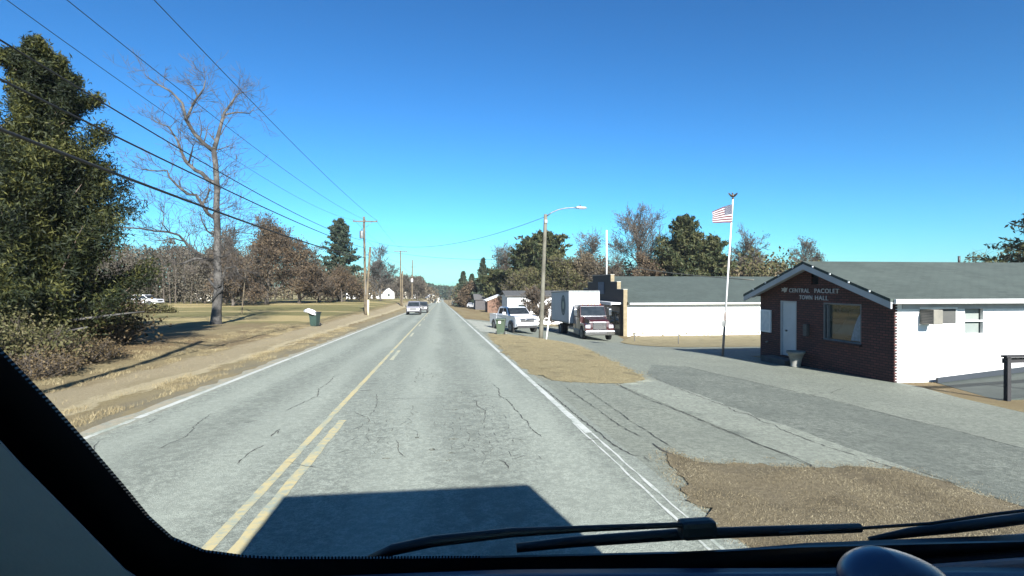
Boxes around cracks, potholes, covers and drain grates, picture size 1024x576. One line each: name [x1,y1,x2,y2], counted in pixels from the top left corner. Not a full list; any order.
crack [344,371,672,468]
